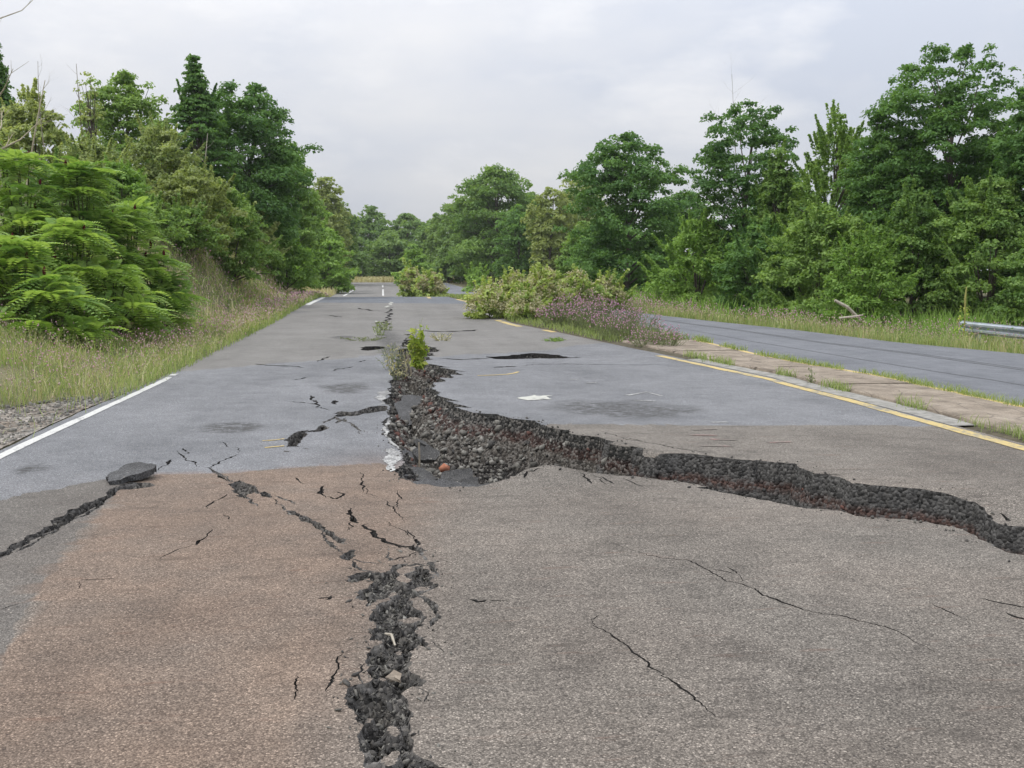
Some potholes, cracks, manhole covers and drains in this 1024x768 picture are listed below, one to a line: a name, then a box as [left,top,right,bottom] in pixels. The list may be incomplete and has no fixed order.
crack [0,307,1024,768]
